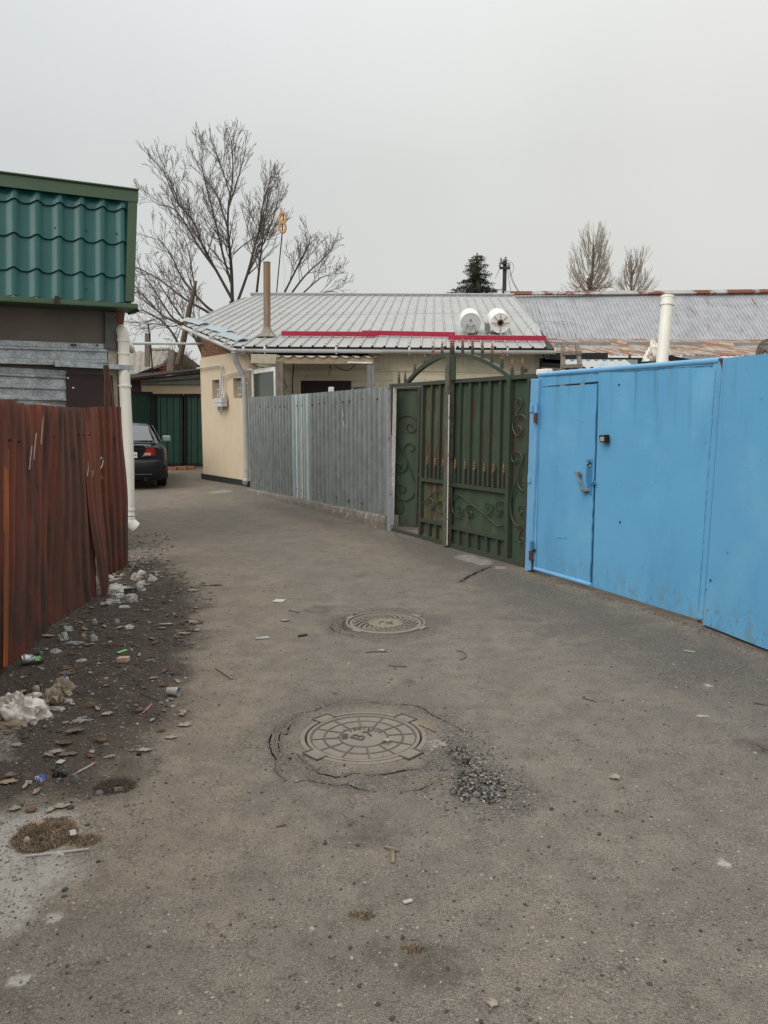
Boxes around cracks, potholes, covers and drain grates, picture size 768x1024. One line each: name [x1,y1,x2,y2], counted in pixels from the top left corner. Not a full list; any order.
crack [266,700,463,794]
manhole cover [345,612,428,635]
crack [458,567,496,583]
manhole cover [300,712,427,765]
pothole [444,743,512,808]
